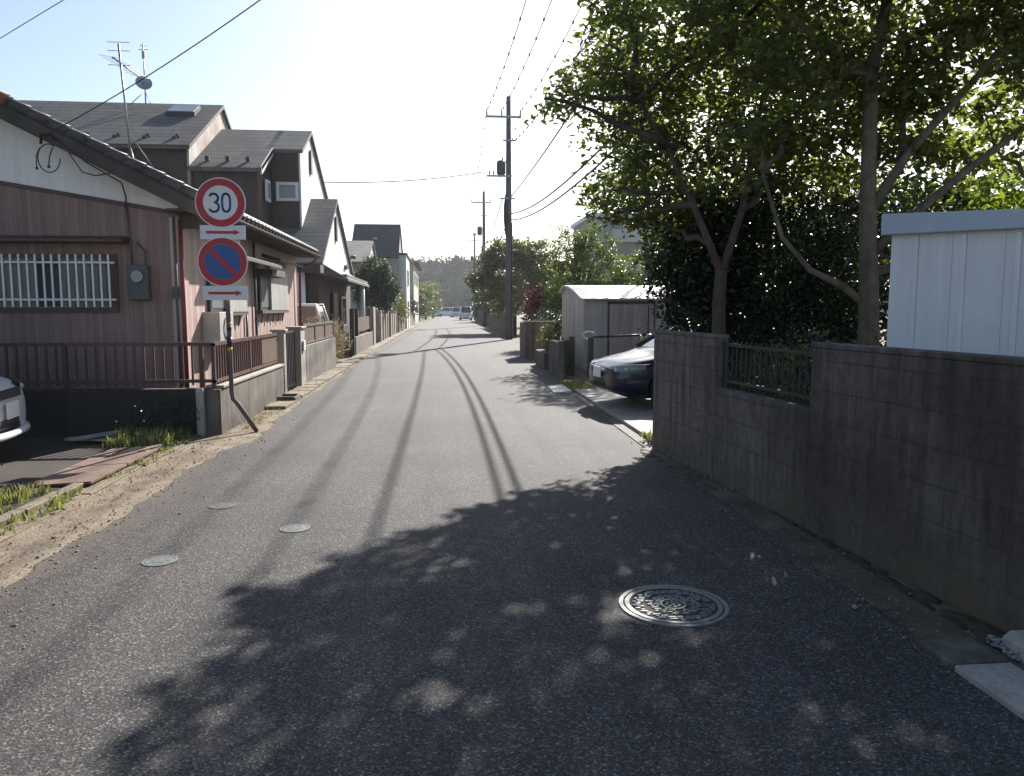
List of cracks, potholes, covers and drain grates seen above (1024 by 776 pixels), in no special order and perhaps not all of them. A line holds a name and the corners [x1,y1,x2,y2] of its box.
utility cover [280,524,310,533]
utility cover [141,555,178,567]
manhole cover [618,584,730,628]
